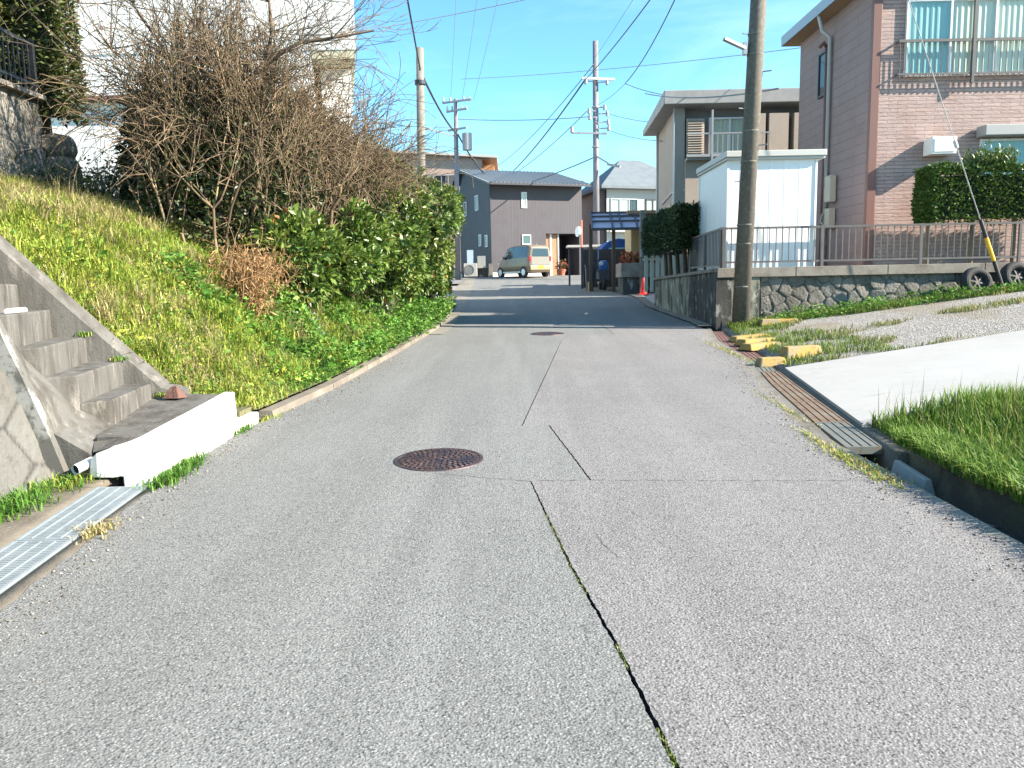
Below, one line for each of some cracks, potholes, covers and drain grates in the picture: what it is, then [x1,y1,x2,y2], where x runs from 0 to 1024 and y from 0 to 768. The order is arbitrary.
crack [430,426,680,768]
drain grate [15,486,147,542]
manhole cover [394,448,483,472]
drain grate [0,539,72,594]
